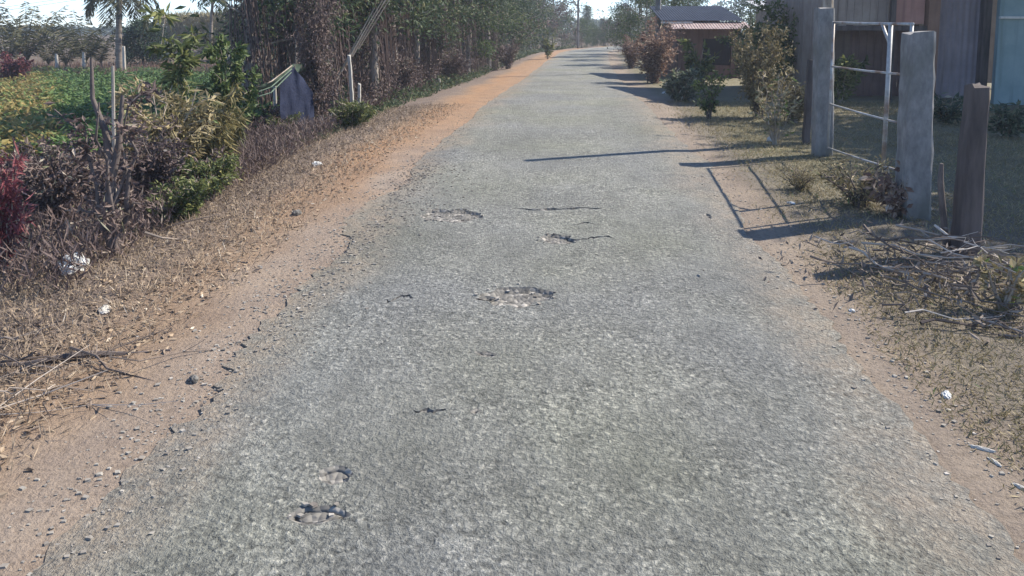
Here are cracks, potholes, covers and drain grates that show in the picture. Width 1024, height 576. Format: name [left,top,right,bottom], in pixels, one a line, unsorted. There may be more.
pothole [319,465,354,485]
crack [517,207,612,240]
pothole [413,208,484,223]
pothole [286,501,351,525]
pothole [474,283,556,309]
